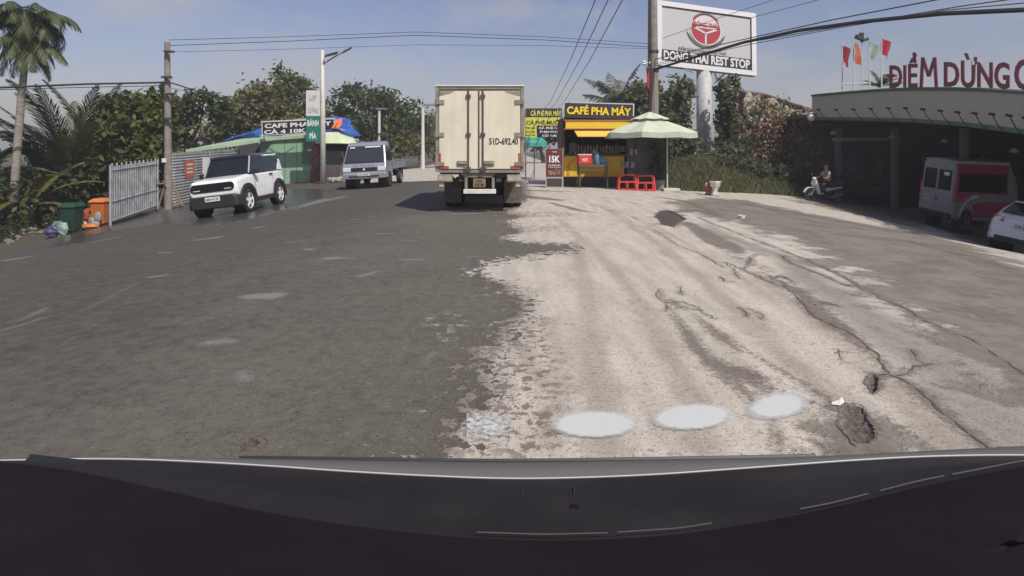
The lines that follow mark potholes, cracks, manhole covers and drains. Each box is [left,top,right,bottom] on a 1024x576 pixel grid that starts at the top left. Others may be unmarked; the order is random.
pothole [862,372,885,395]
pothole [836,402,886,448]
crack [720,256,989,447]
